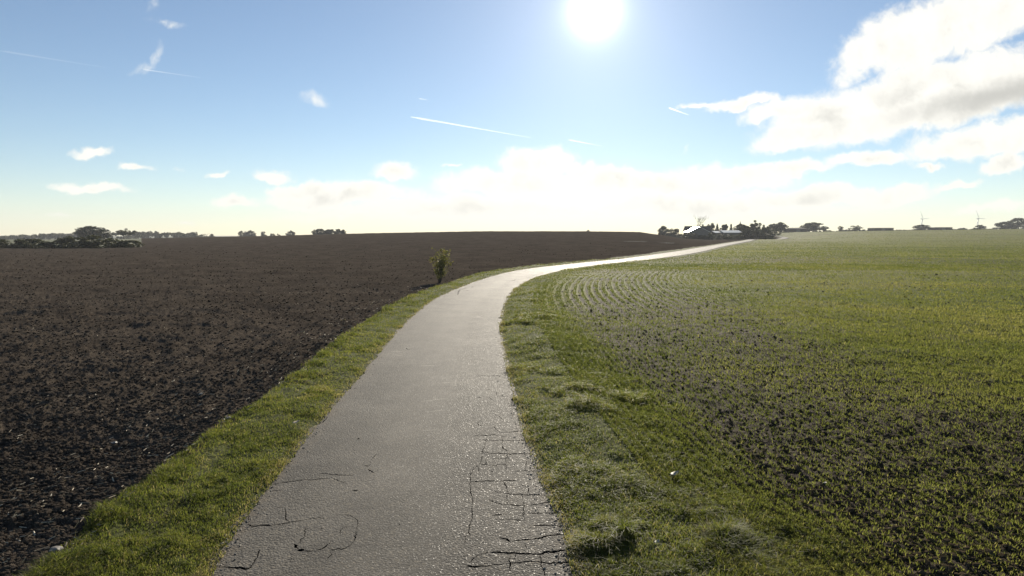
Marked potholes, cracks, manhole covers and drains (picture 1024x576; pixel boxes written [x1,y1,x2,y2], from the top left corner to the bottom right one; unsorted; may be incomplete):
crack [247,473,359,562]
crack [464,389,577,575]
